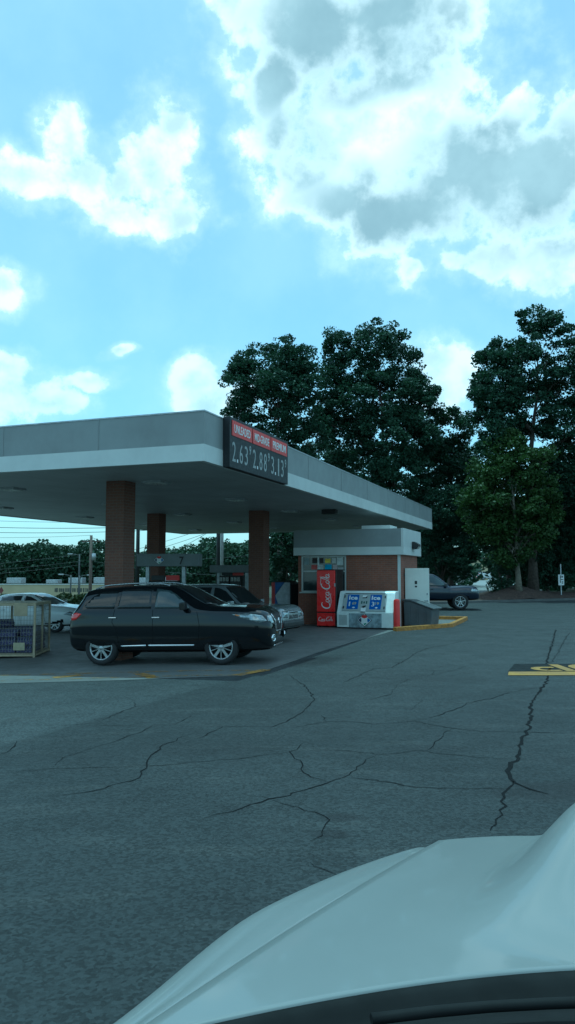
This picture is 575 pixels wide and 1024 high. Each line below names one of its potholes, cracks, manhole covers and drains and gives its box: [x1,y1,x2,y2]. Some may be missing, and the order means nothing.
crack [16,630,569,840]
